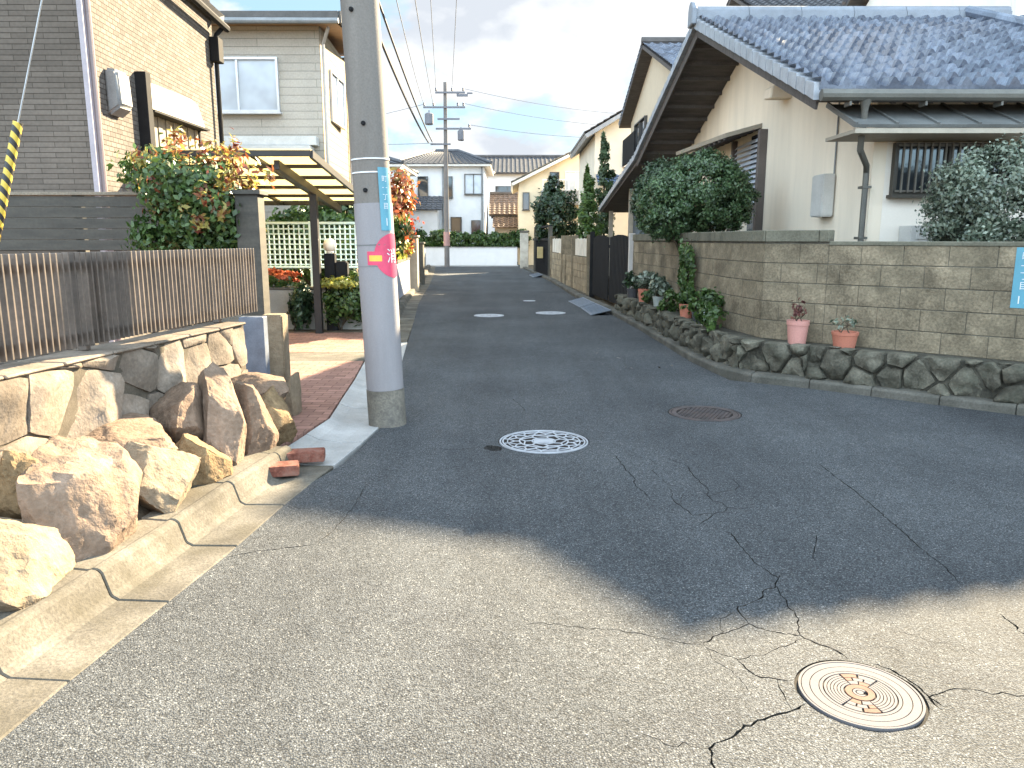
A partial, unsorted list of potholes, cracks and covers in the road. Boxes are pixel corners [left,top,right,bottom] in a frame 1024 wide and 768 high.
crack [877,664,1024,710]
manhole cover [668,406,742,422]
manhole cover [794,660,932,733]
crack [528,455,848,768]
manhole cover [498,430,590,454]
